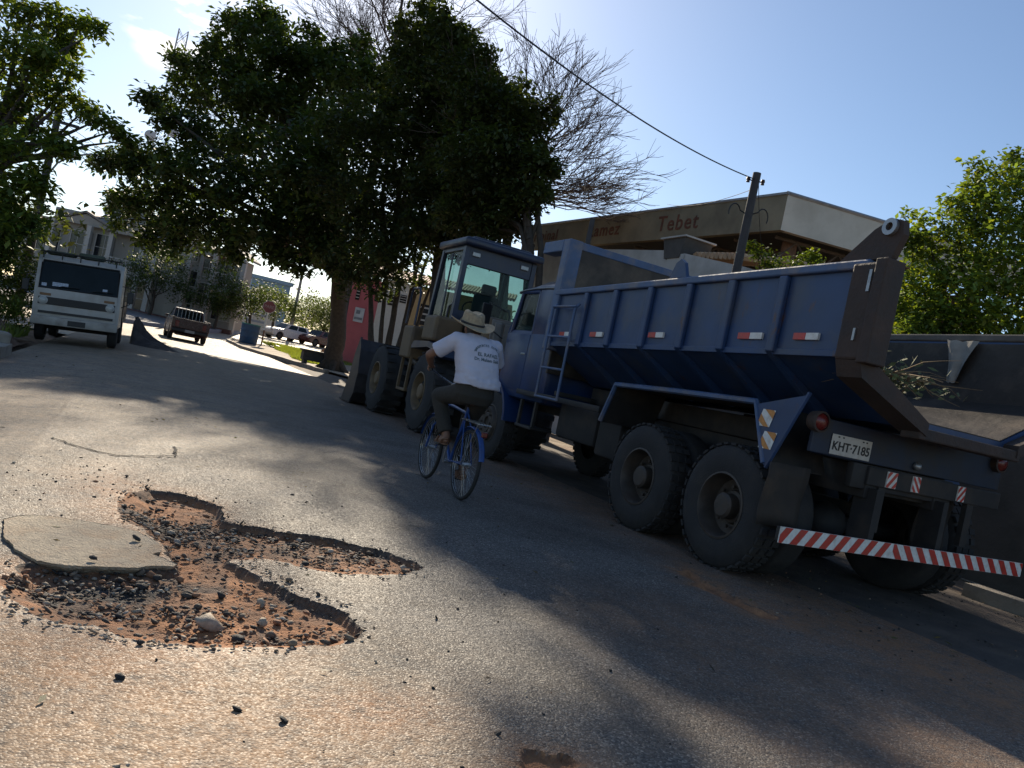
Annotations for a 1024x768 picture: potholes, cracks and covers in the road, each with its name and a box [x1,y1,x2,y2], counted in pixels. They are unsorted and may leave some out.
pothole [117,489,425,576]
pothole [514,748,582,768]
pothole [0,549,363,648]
crack [51,437,178,456]
